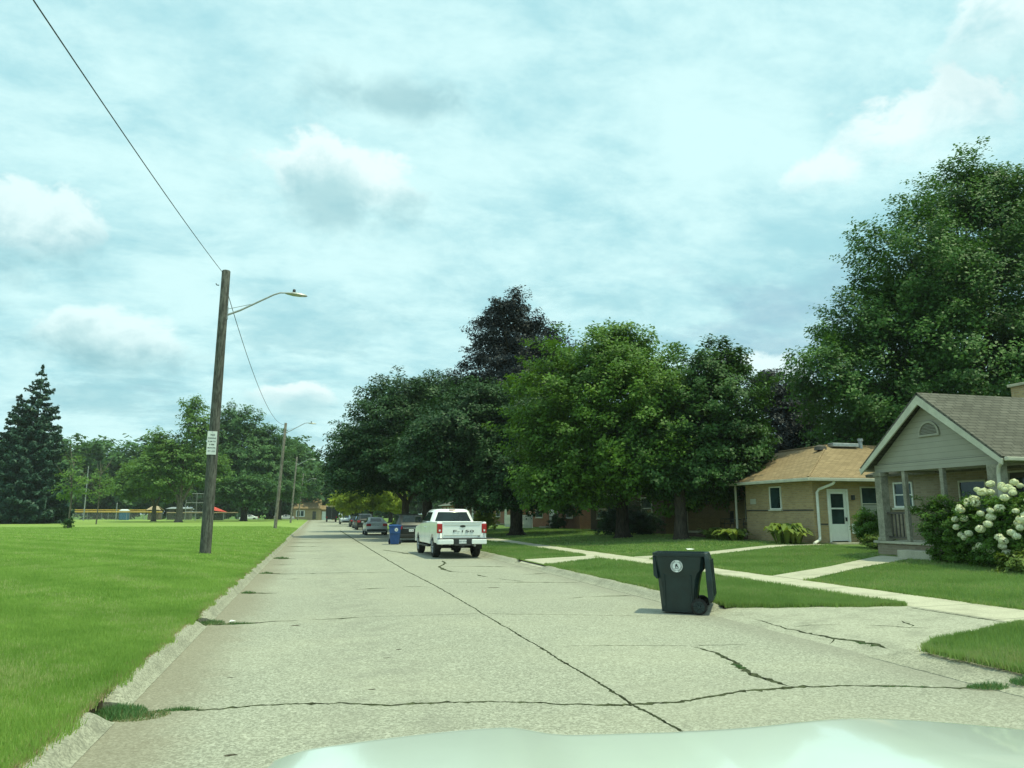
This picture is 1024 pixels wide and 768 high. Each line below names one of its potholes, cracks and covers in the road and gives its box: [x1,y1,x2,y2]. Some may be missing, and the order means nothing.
crack [170,531,1006,732]
